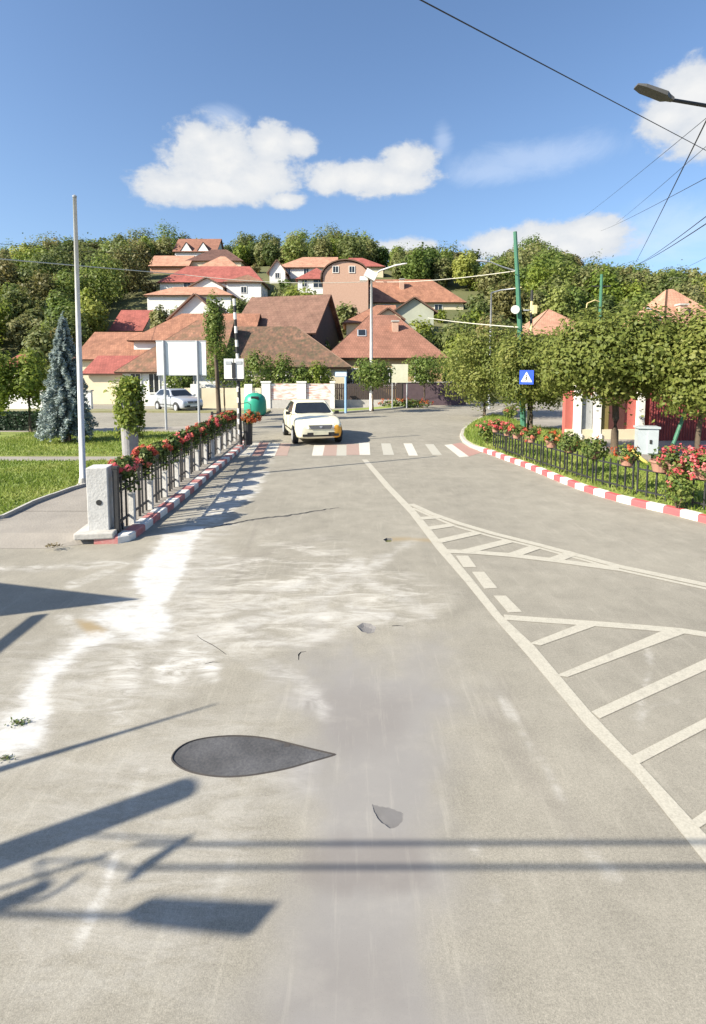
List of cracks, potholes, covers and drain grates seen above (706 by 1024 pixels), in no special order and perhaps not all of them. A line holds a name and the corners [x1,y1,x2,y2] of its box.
pothole [372,804,404,828]
pothole [357,623,376,634]
